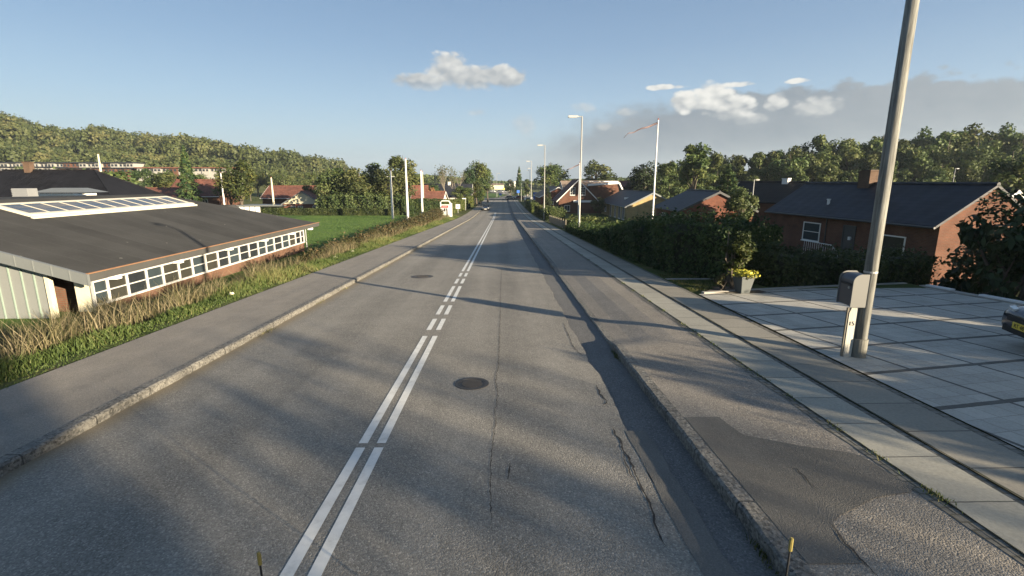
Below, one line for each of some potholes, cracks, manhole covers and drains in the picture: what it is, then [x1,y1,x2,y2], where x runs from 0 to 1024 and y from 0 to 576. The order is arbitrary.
crack [613,428,666,546]
crack [489,271,510,529]
manhole cover [455,377,489,390]
